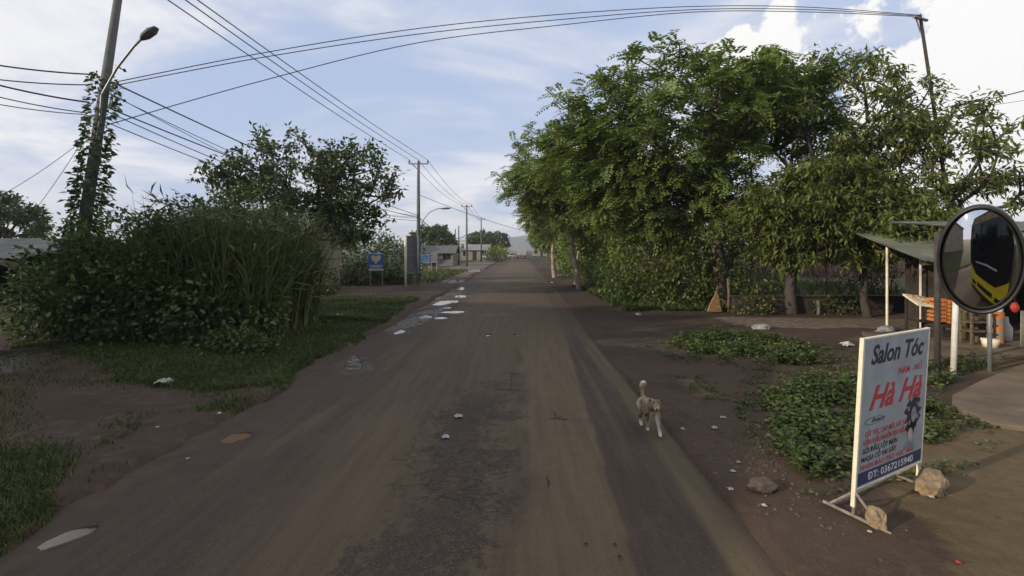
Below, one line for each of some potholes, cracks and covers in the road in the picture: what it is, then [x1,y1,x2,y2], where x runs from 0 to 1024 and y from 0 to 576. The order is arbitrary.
pothole [214,431,259,446]
crack [384,403,519,513]
pothole [340,356,366,373]
